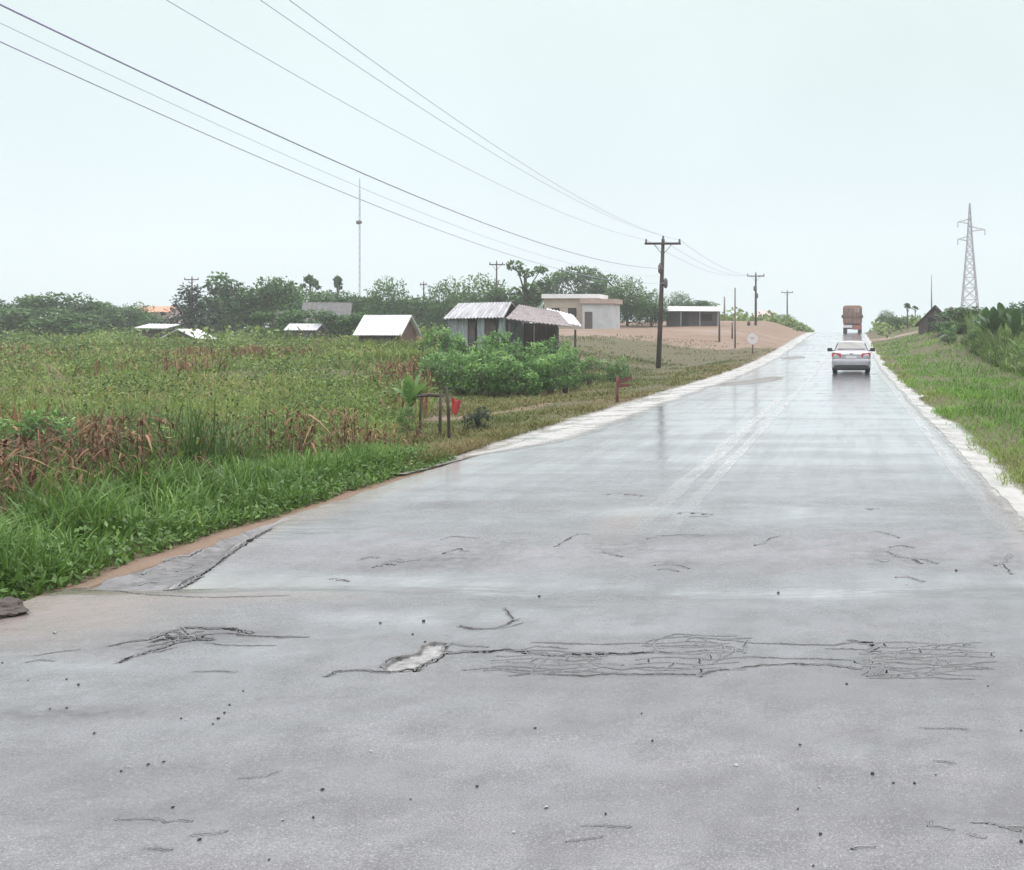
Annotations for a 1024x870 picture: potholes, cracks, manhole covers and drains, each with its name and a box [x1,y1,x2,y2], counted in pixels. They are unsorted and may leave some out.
pothole [380,641,450,673]
crack [555,533,622,557]
crack [995,554,1014,575]
crack [442,536,477,554]
crack [655,563,689,572]
crack [110,608,996,680]
crack [361,555,420,567]
crack [875,531,937,582]
